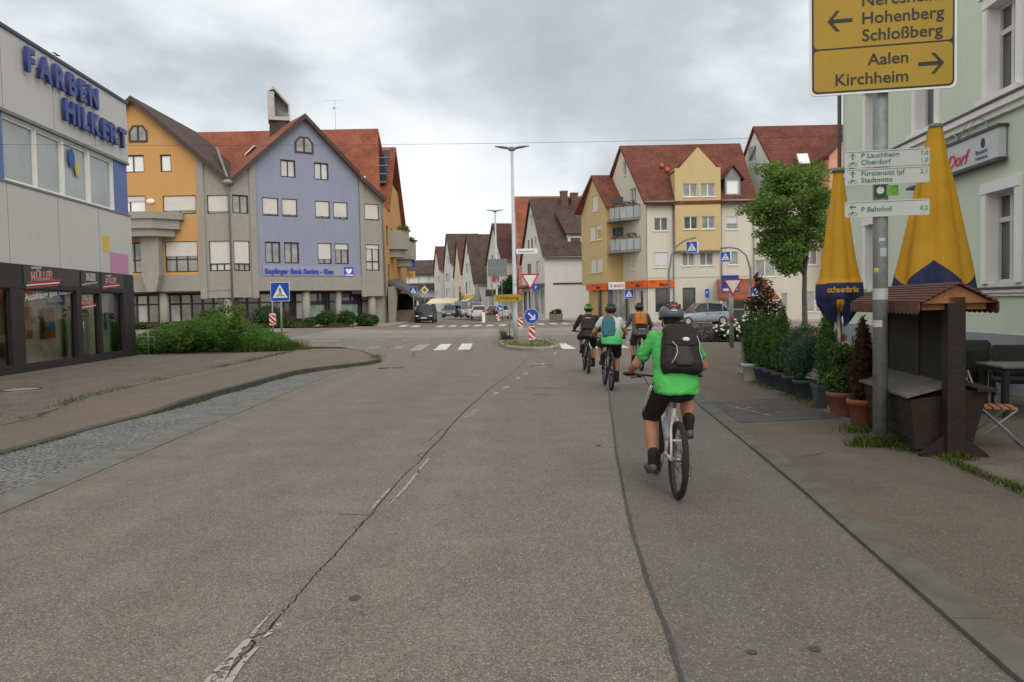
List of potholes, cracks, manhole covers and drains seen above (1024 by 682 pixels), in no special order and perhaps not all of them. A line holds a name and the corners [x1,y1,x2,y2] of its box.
crack [215,356,531,682]
